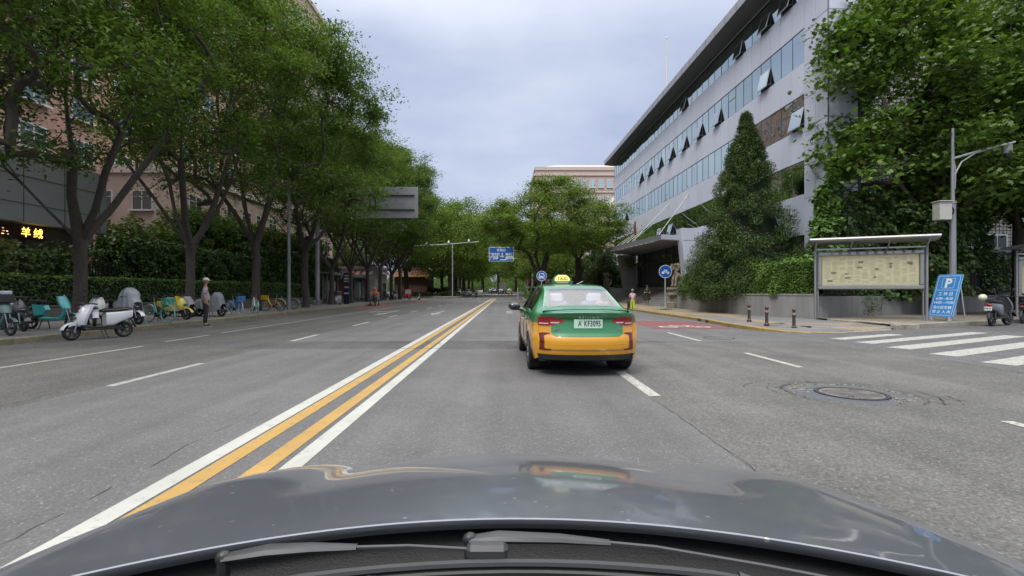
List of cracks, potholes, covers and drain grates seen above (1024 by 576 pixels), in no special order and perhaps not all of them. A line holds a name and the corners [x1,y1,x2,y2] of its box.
manhole cover [814,387,891,401]
